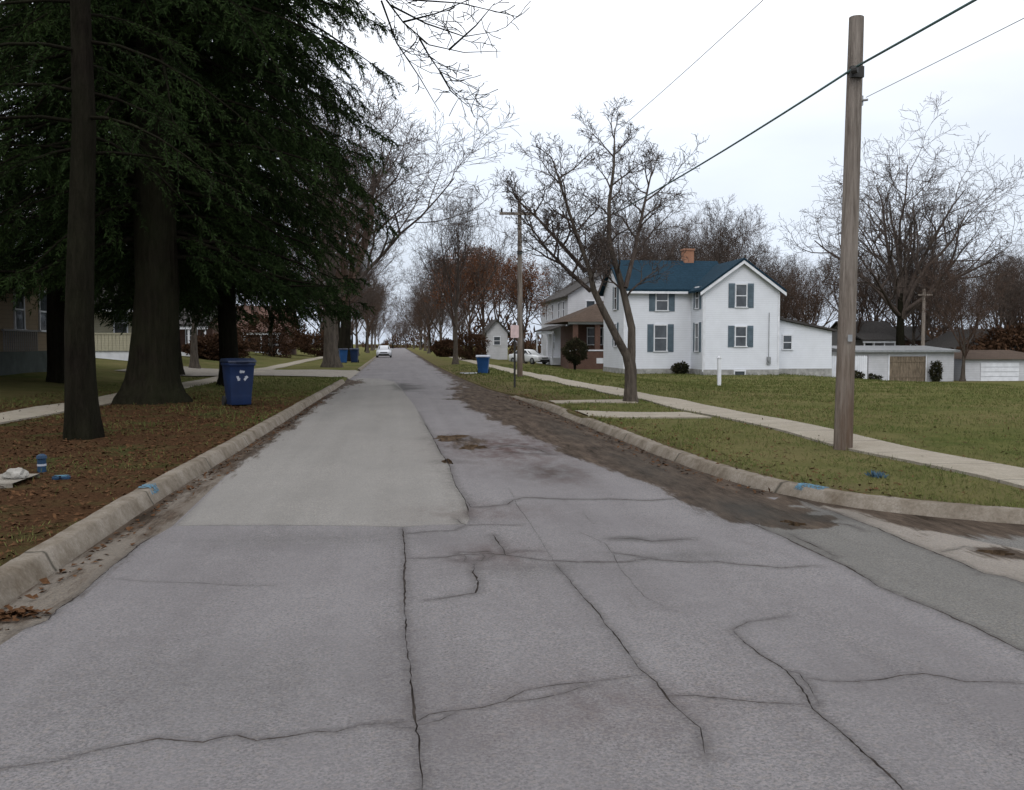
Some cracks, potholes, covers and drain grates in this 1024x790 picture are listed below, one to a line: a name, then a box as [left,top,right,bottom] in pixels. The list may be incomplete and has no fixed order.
crack [0,426,903,790]
crack [791,673,1024,684]
